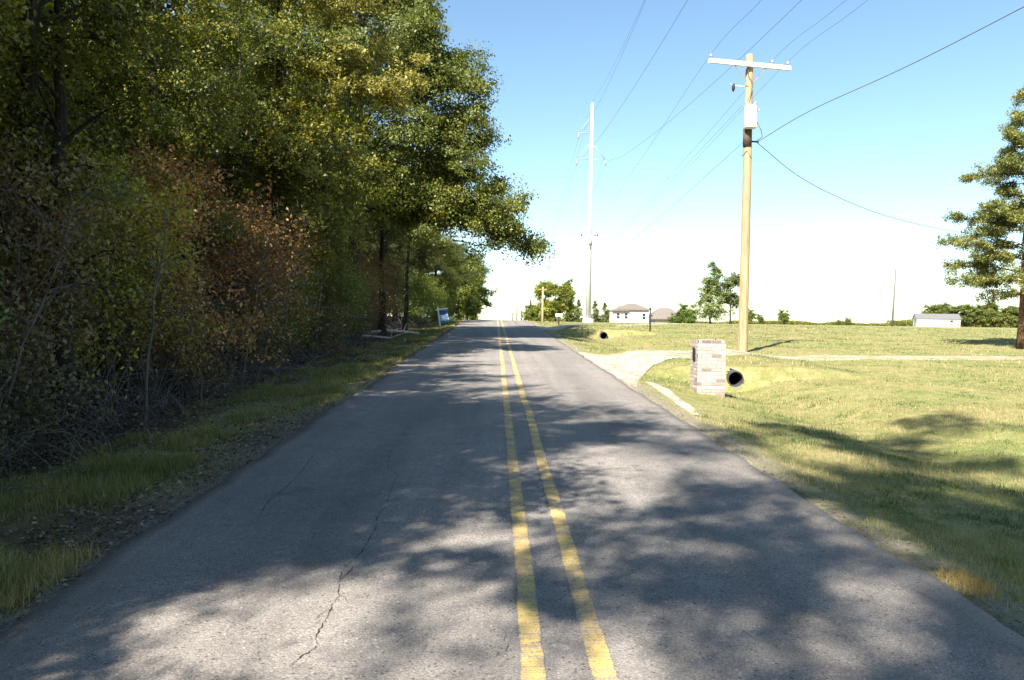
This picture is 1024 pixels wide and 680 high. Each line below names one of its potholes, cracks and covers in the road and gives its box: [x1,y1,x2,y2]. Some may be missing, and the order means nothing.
crack [289,446,396,667]
